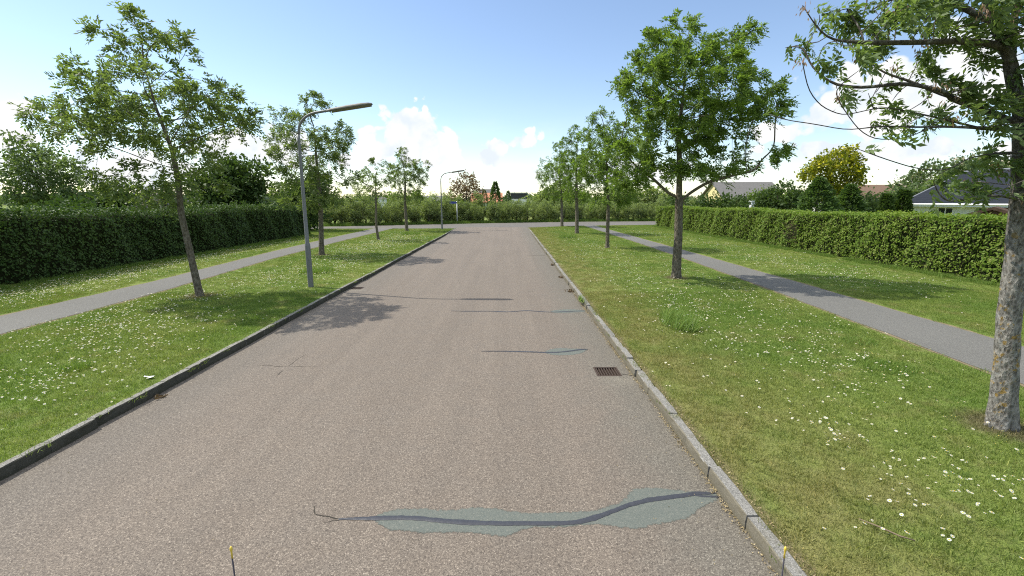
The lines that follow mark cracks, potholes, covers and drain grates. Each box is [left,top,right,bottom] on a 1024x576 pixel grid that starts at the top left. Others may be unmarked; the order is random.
drain grate [593,367,622,376]
